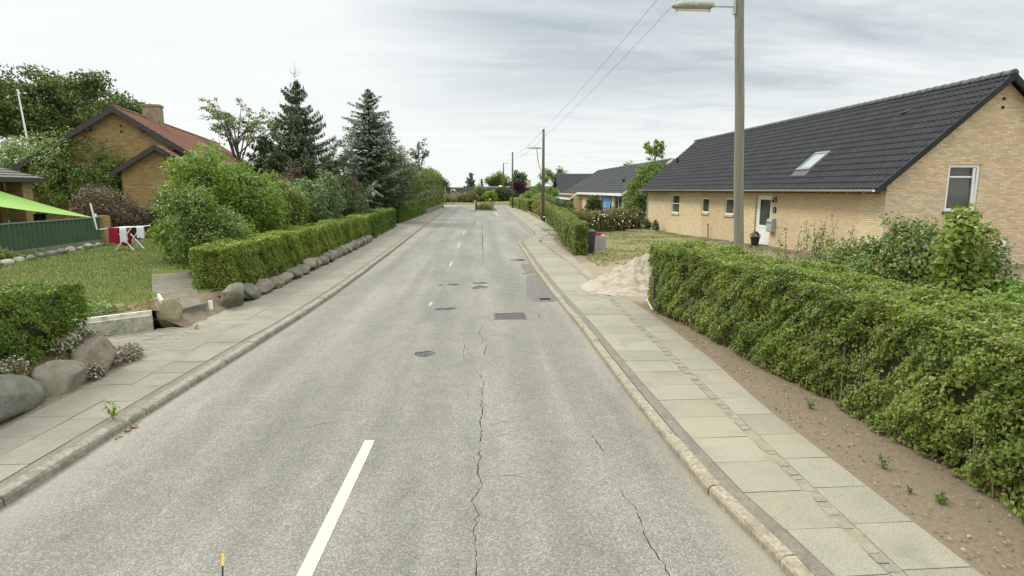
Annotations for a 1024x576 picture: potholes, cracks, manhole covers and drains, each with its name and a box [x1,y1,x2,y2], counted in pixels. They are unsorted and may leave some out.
crack [463,326,519,576]
manhole cover [493,312,528,320]
